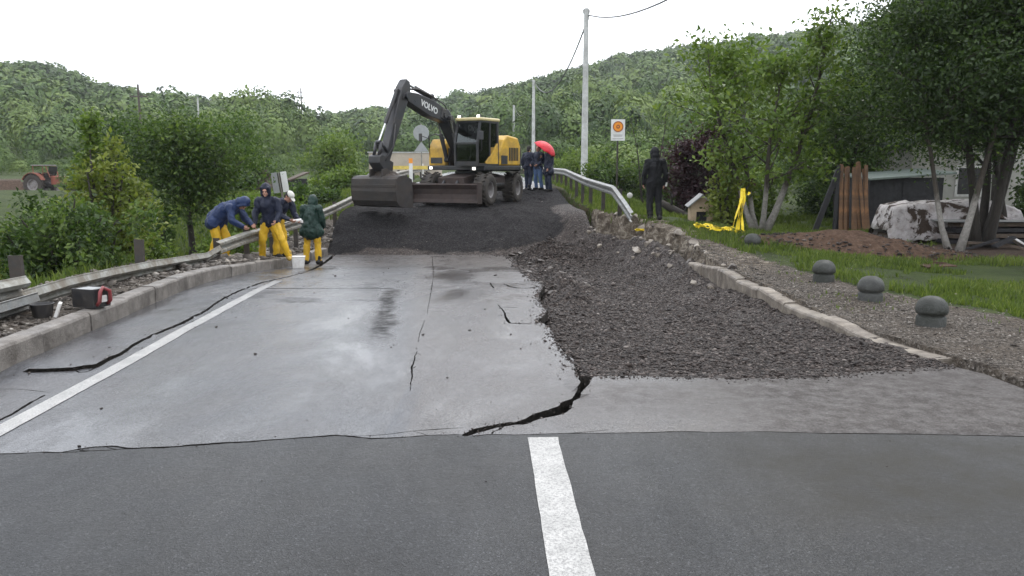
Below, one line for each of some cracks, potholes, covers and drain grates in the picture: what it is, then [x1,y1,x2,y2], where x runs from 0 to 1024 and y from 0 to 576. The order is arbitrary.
crack [462,376,1023,437]
crack [24,256,332,373]
